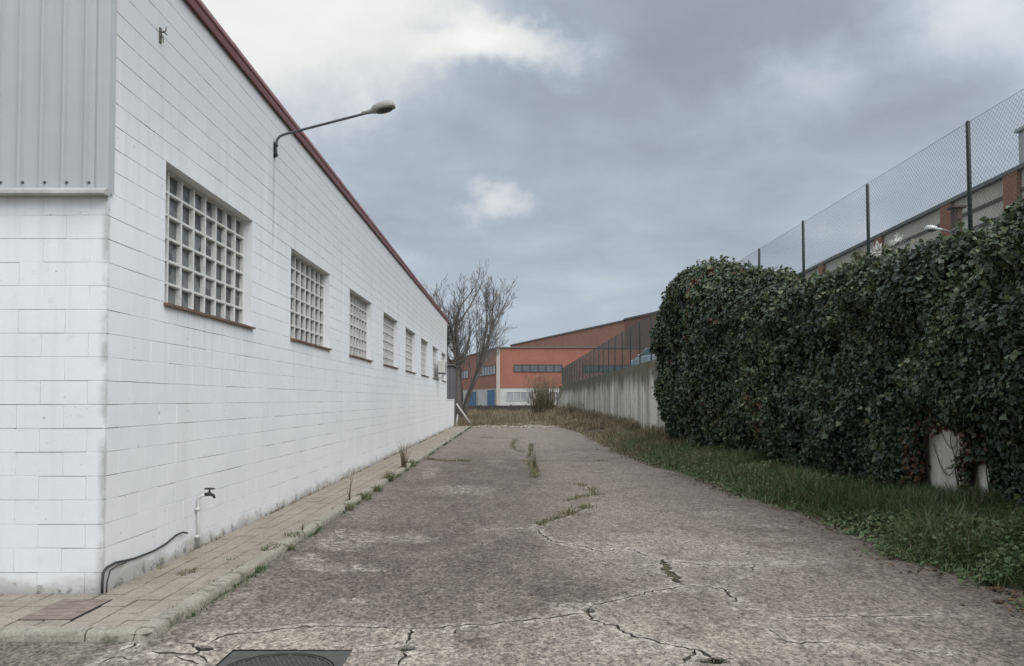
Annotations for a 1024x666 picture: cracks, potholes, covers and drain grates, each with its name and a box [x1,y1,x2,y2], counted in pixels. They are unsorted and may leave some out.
utility cover [18,599,112,621]
manhole cover [217,651,352,666]
crack [103,508,769,666]
